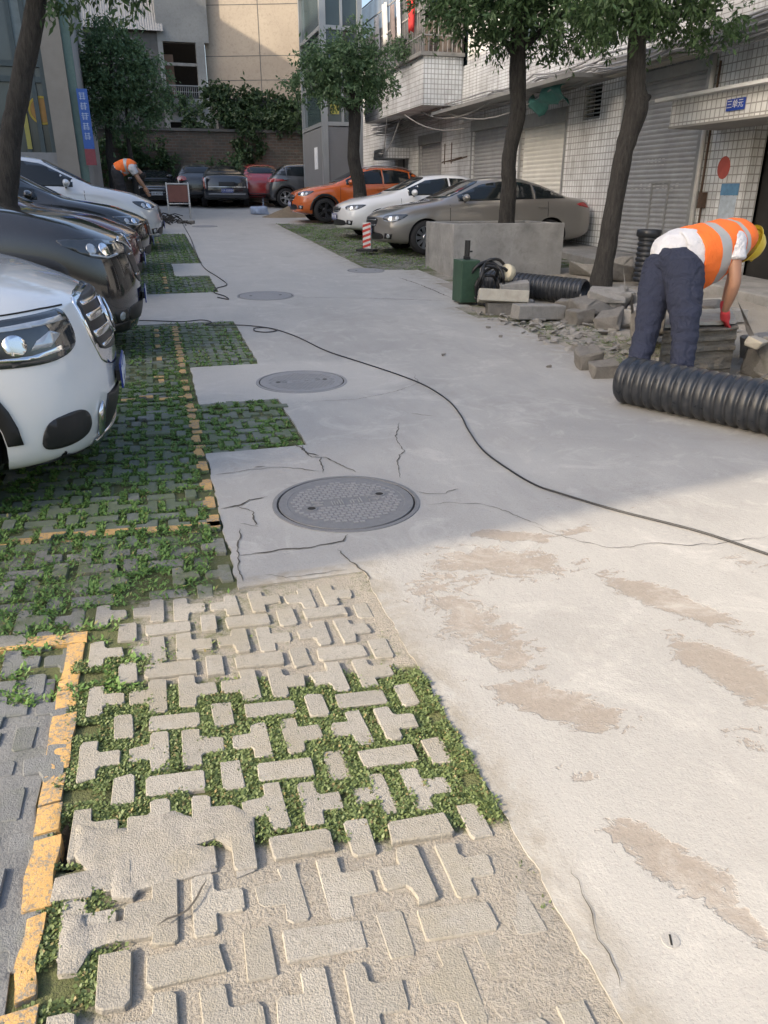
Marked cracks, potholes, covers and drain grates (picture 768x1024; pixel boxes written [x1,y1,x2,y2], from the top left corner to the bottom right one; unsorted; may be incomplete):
manhole cover [237,291,294,301]
crack [216,445,353,475]
manhole cover [256,370,347,393]
manhole cover [272,476,420,533]
crack [221,496,371,581]
crack [571,872,620,983]
crack [422,489,764,548]
